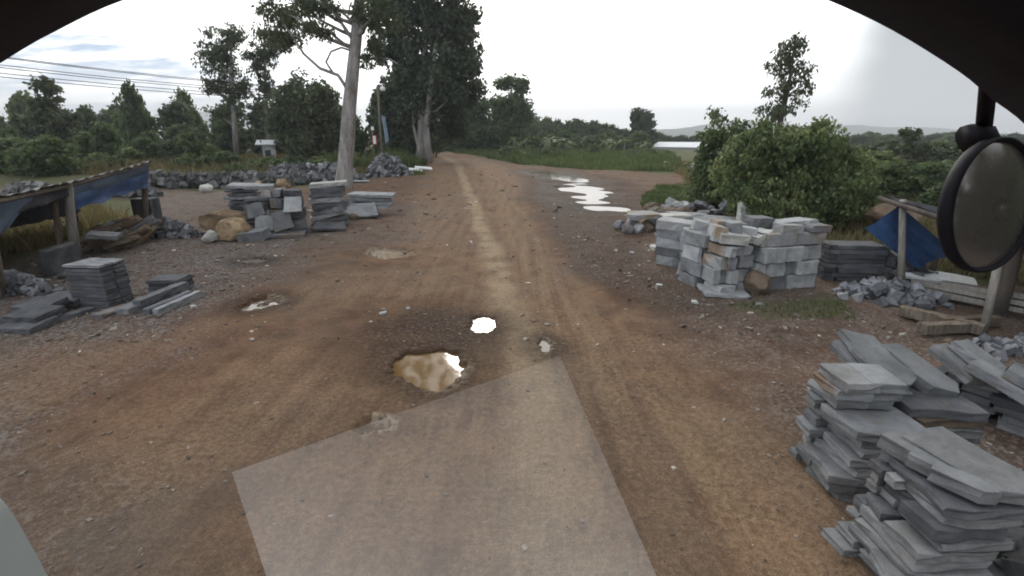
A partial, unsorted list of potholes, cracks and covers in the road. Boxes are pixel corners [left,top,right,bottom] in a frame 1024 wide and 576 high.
pothole [358,246,427,261]
pothole [526,332,566,358]
pothole [376,343,481,400]
pothole [222,292,295,315]
pothole [456,312,510,337]
